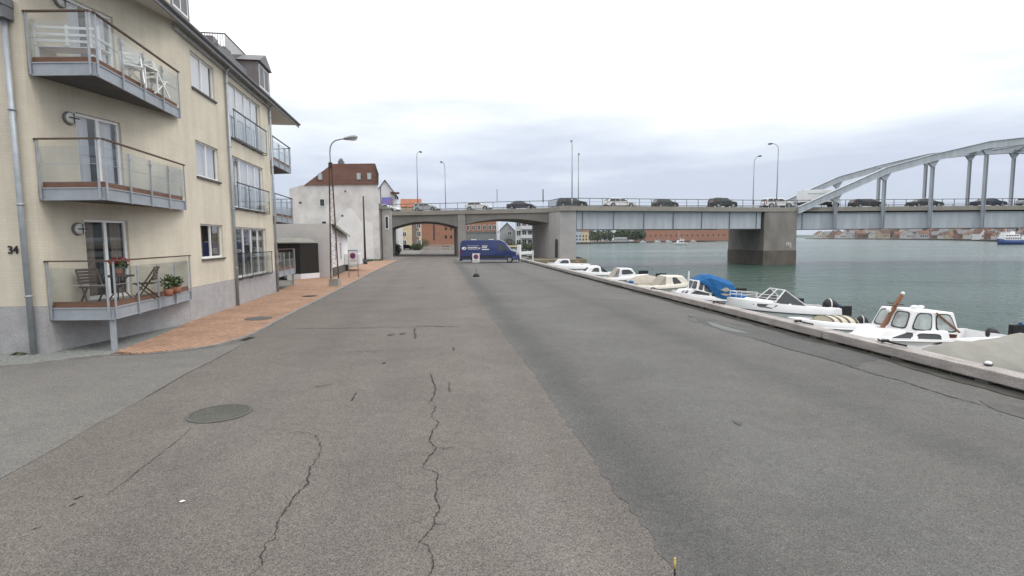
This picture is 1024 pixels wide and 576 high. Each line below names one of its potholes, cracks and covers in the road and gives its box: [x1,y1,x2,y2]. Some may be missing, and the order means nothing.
crack [252,432,322,573]
manhole cover [185,404,253,423]
crack [418,373,451,576]
crack [106,425,193,495]
